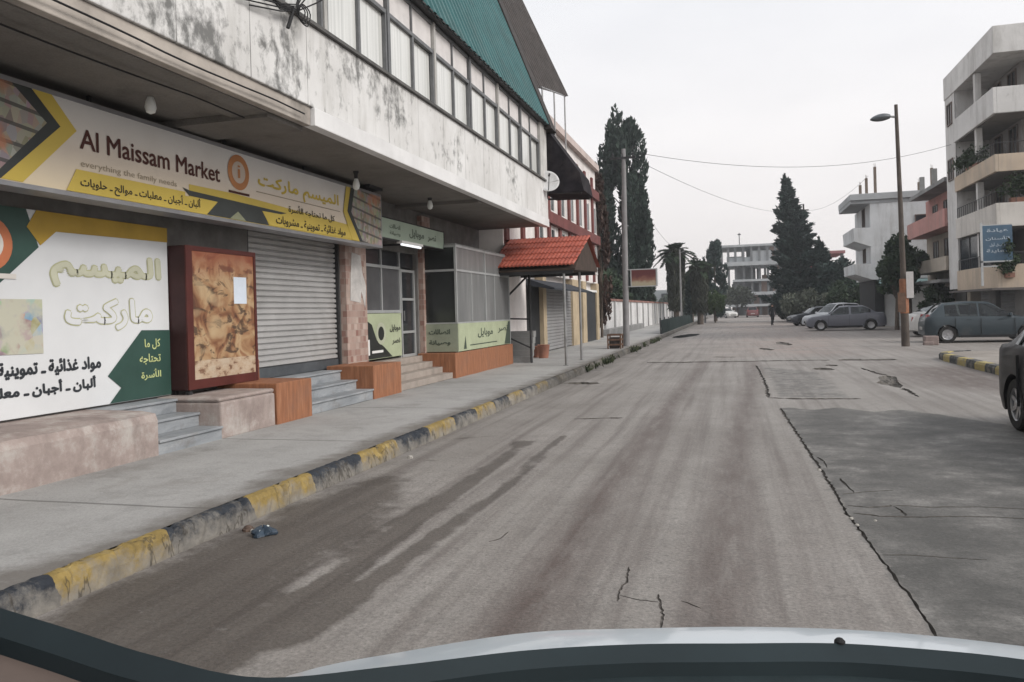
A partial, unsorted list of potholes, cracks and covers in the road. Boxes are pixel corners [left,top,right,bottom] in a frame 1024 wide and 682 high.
pothole [877,376,903,388]
crack [647,359,1024,636]
crack [617,567,700,628]
